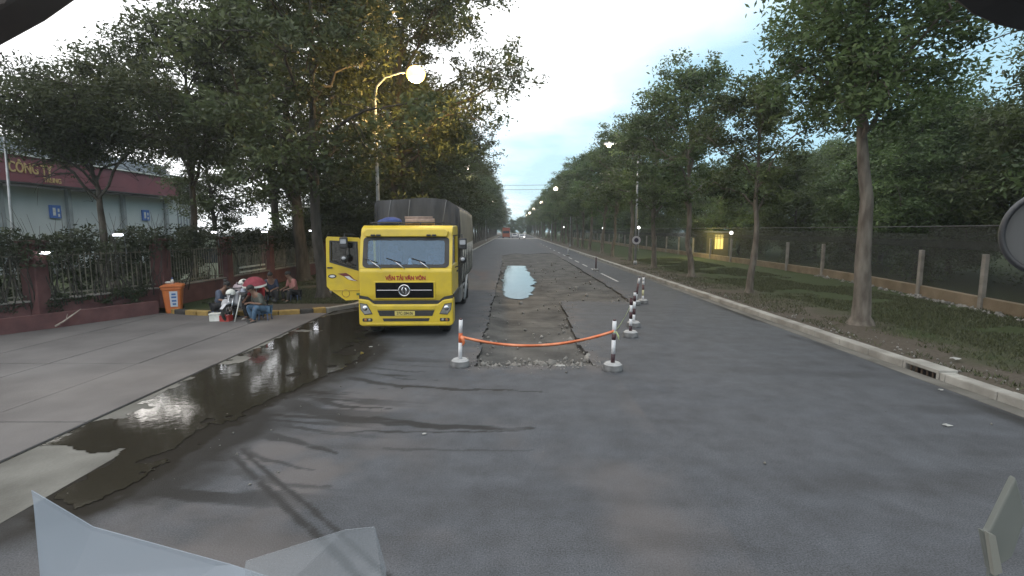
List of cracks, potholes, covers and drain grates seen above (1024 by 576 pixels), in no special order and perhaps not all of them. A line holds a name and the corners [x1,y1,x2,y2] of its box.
pothole [467,253,630,374]
drain grate [903,359,958,380]
